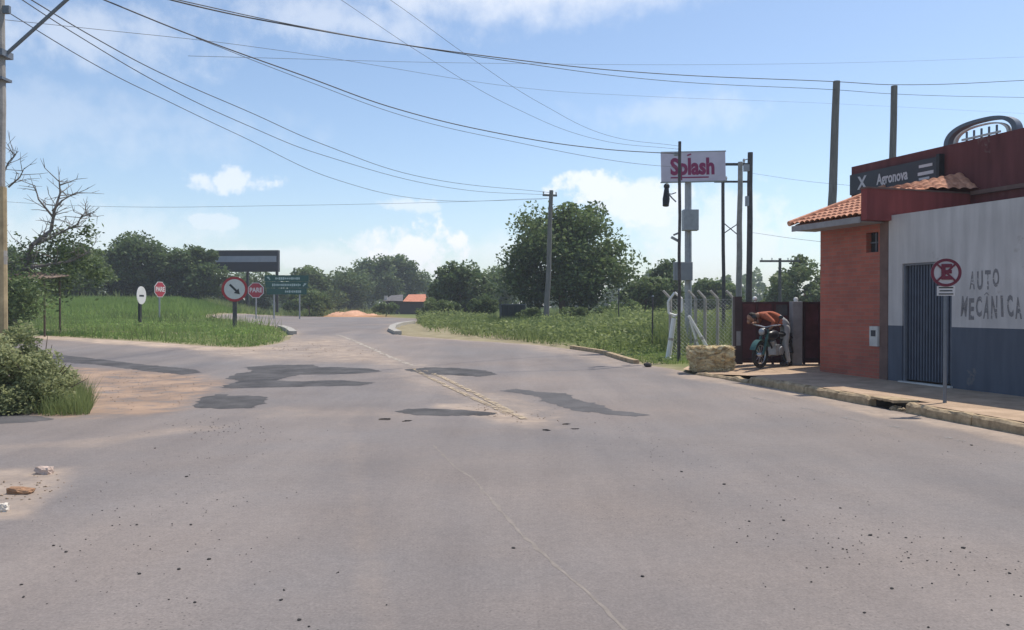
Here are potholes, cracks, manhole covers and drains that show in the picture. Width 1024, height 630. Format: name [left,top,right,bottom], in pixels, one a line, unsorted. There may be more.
drain grate [869,396,919,412]
crack [433,445,627,630]
